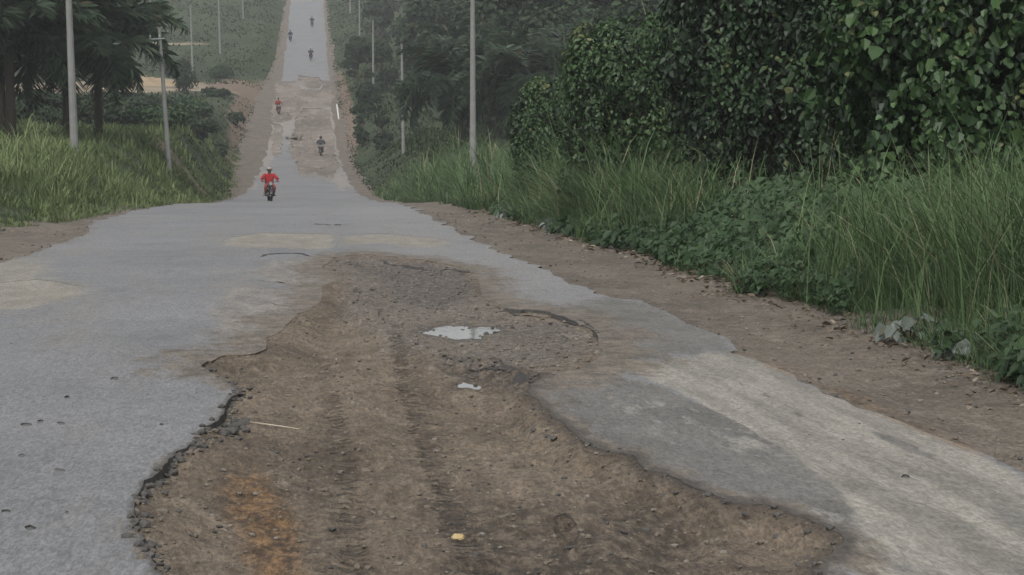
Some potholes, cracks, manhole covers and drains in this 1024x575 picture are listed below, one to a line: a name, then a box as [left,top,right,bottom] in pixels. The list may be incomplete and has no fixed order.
pothole [323,254,602,374]
crack [494,306,599,338]
pothole [132,281,845,575]
